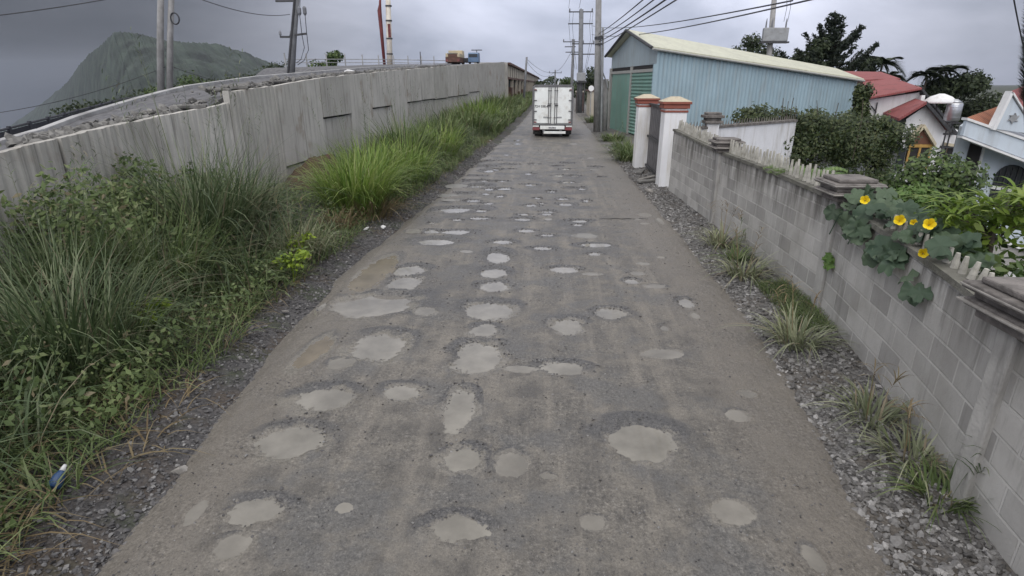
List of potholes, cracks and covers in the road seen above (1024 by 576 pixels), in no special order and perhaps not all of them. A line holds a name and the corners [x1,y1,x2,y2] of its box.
pothole [430,382,484,448]
pothole [523,358,603,380]
pothole [274,380,372,418]
pothole [328,324,432,373]
pothole [326,498,361,518]
pothole [435,336,518,387]
pothole [428,438,494,484]
pothole [402,506,514,555]
pothole [575,411,709,477]
pothole [536,312,599,342]
pothole [697,493,766,534]
pothole [629,346,700,363]
